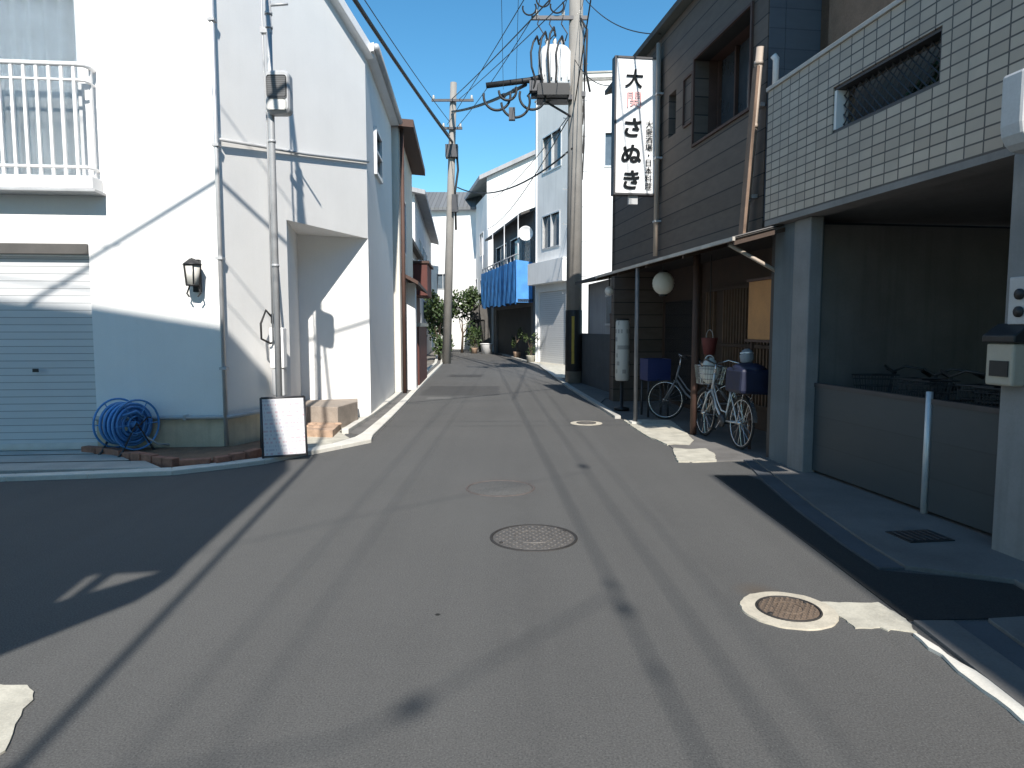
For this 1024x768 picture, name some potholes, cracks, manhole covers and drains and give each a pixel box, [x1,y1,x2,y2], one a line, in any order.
manhole cover [466,480,535,497]
manhole cover [739,591,839,631]
manhole cover [490,524,578,552]
